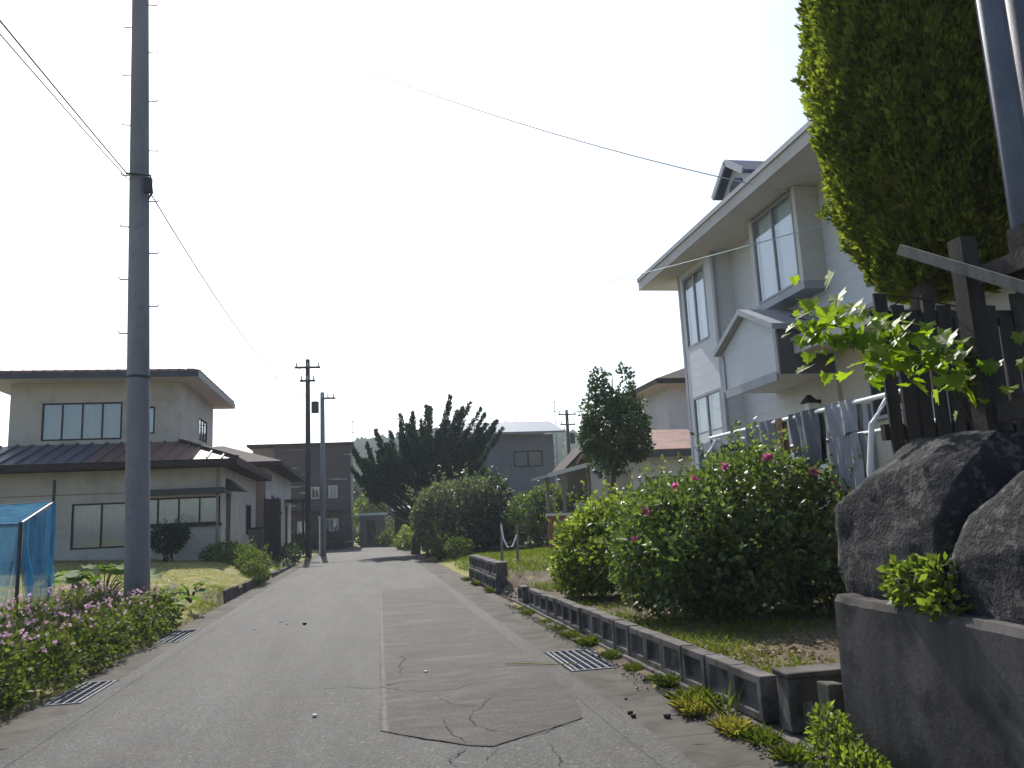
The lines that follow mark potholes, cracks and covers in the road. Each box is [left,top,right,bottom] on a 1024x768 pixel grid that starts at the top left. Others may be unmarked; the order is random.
drain grate [546,649,618,672]
drain grate [156,629,200,644]
drain grate [42,680,117,707]
crack [293,655,575,766]
